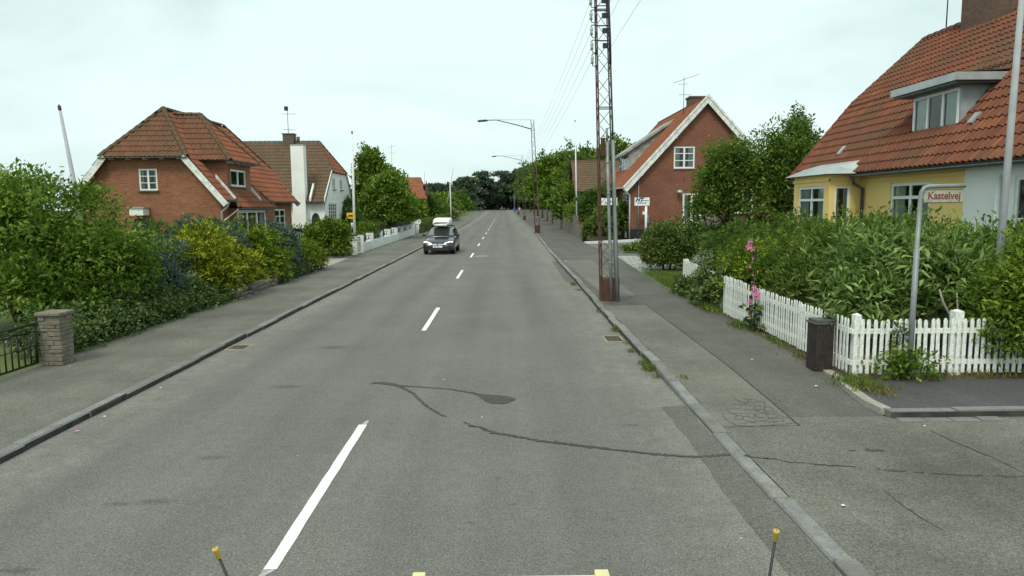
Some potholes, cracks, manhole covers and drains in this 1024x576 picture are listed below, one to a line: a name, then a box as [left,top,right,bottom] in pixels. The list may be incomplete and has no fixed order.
crack [465,398,885,467]
crack [876,468,1020,477]
